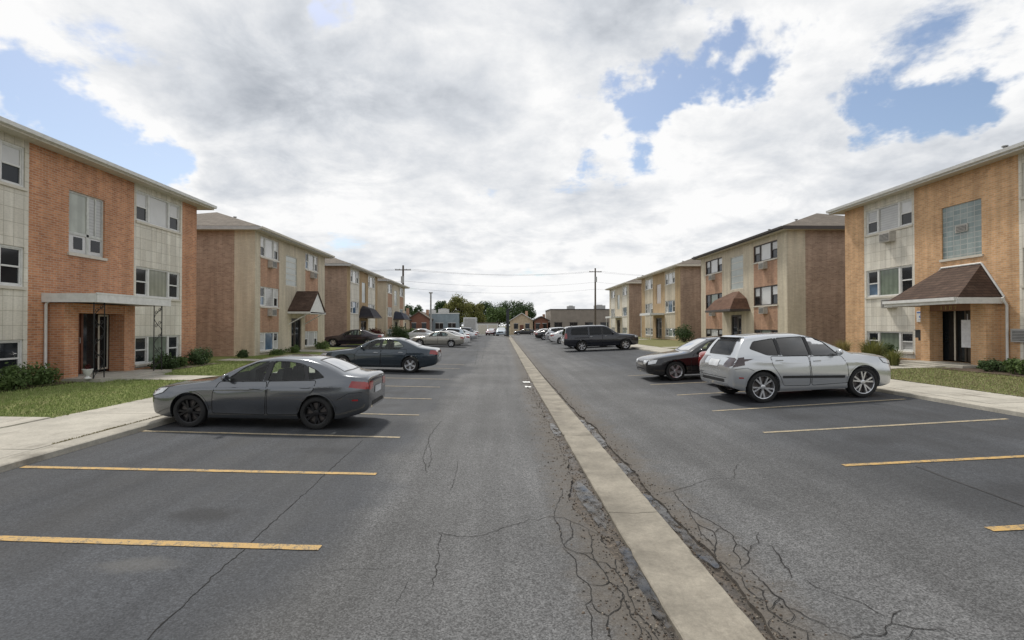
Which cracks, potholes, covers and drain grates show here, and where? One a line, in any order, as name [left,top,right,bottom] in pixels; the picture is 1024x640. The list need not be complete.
crack [663,467,948,640]
crack [147,440,363,640]
crack [432,491,658,640]
